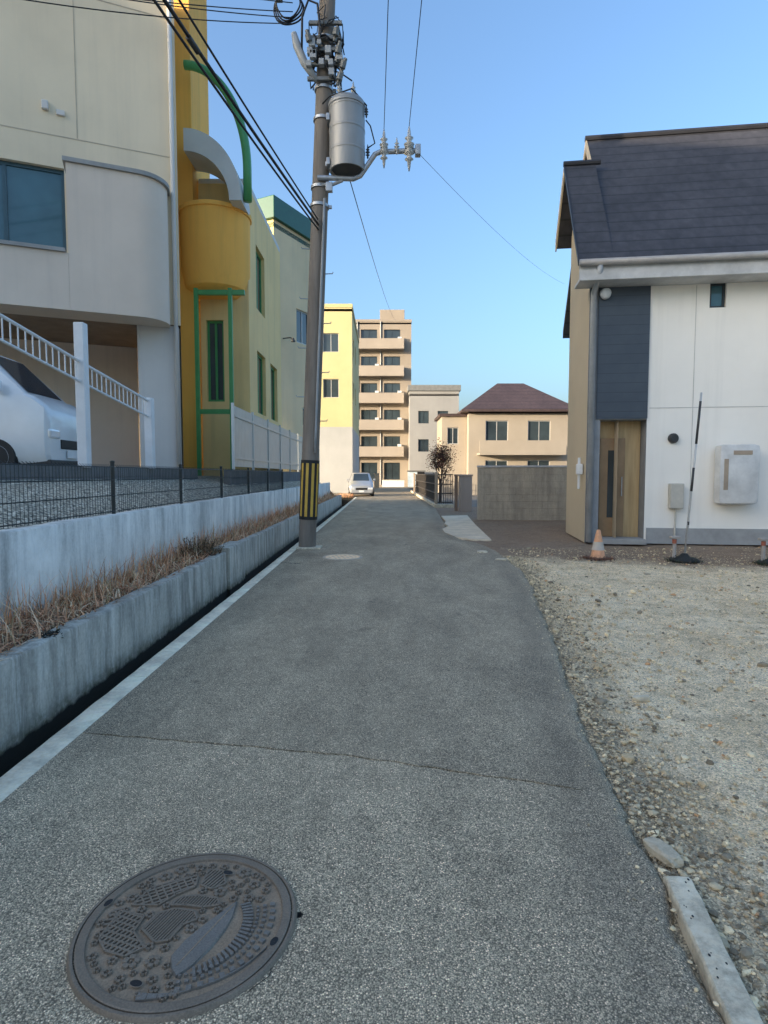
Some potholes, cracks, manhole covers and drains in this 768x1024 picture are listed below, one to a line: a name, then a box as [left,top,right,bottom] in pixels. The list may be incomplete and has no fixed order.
manhole cover [66,853,297,1024]
